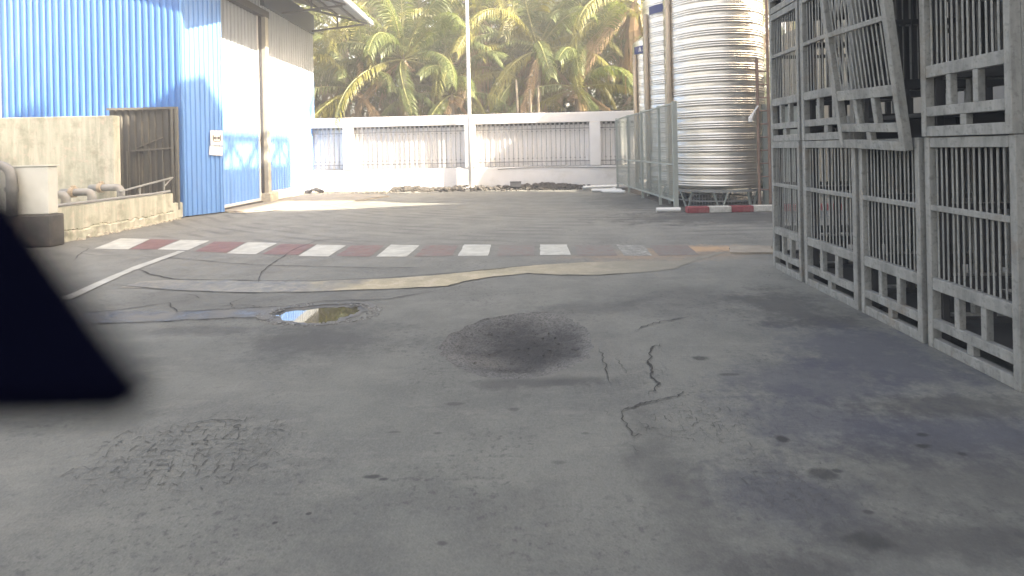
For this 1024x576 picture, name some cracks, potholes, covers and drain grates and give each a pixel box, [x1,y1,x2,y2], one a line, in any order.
crack [601,317,863,532]
crack [61,413,303,497]
pothole [256,302,383,327]
